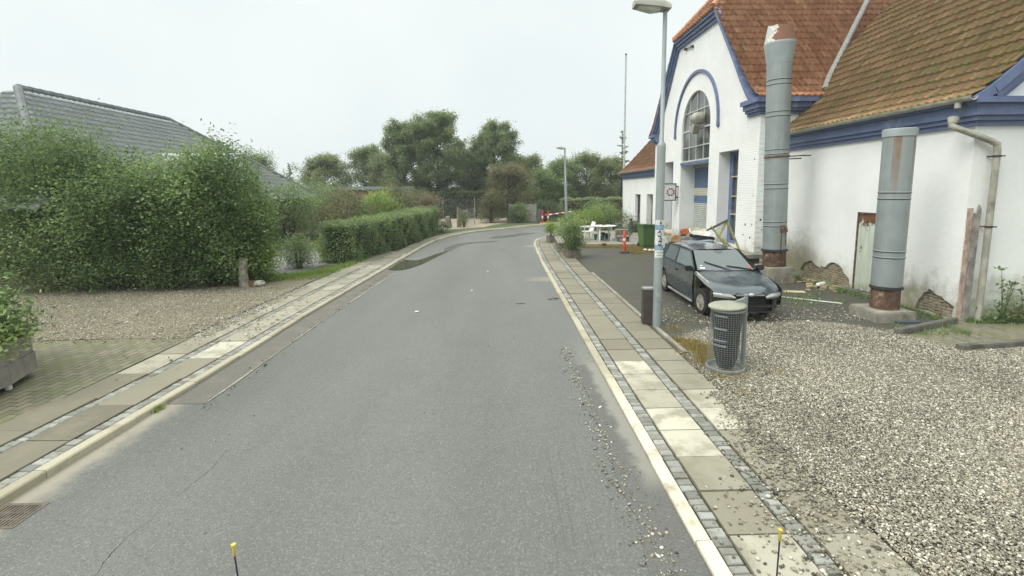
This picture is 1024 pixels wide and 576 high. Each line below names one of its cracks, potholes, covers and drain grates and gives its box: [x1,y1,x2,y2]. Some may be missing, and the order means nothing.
drain grate [0,502,50,529]
crack [94,455,223,576]
